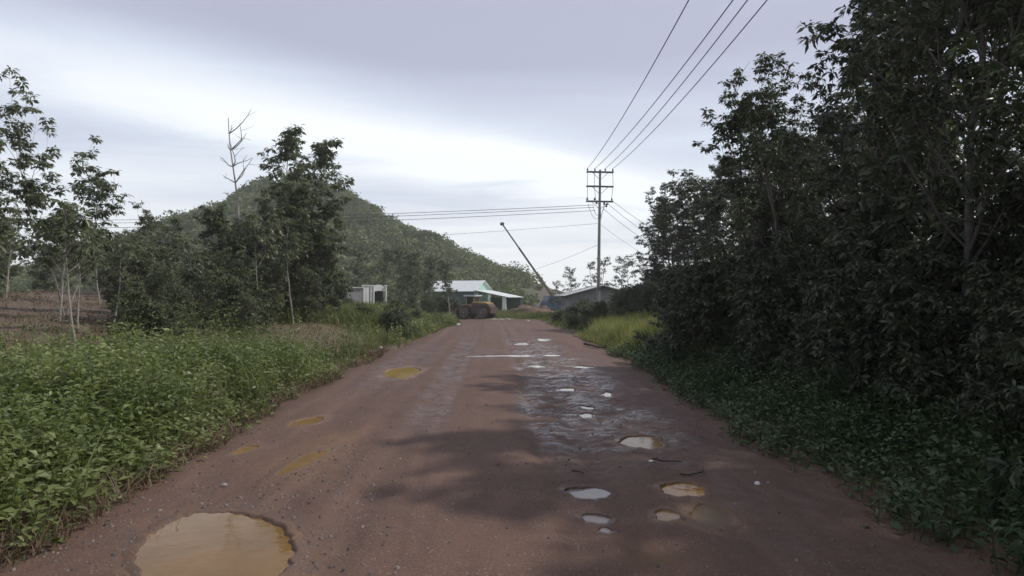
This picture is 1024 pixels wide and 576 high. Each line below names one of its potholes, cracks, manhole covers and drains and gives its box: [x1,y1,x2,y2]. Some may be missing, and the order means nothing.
pothole [681,499,745,533]
pothole [120,508,310,576]
pothole [254,442,347,487]
pothole [590,524,621,536]
pothole [557,485,619,501]
pothole [653,480,713,499]
pothole [574,511,619,528]
pothole [574,412,597,421]
pothole [597,389,615,399]
pothole [281,415,330,429]
pothole [648,505,686,525]
pothole [222,443,267,458]
